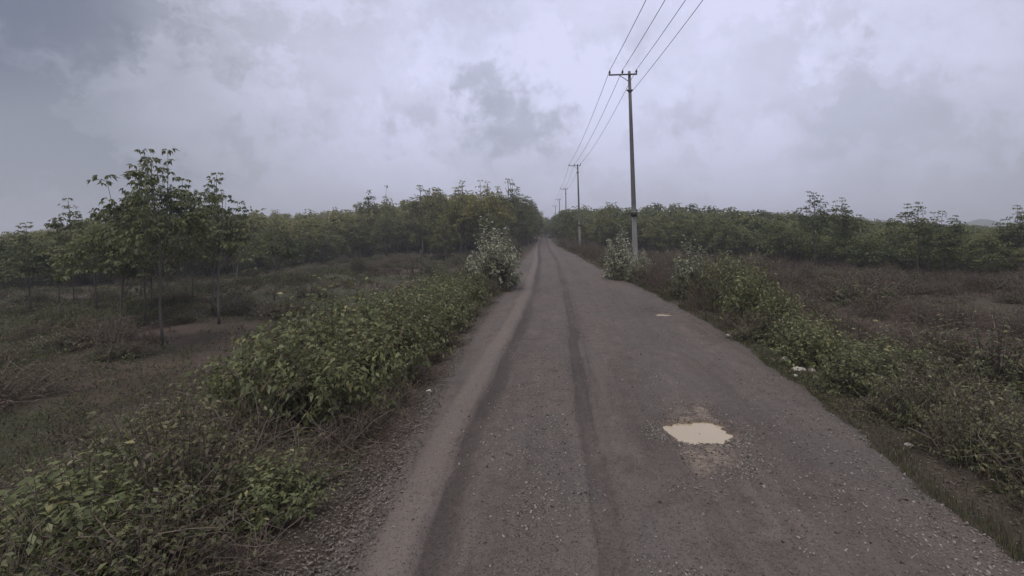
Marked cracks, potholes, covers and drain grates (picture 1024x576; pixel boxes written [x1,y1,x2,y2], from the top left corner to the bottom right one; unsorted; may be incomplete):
pothole [658,404,744,476]
